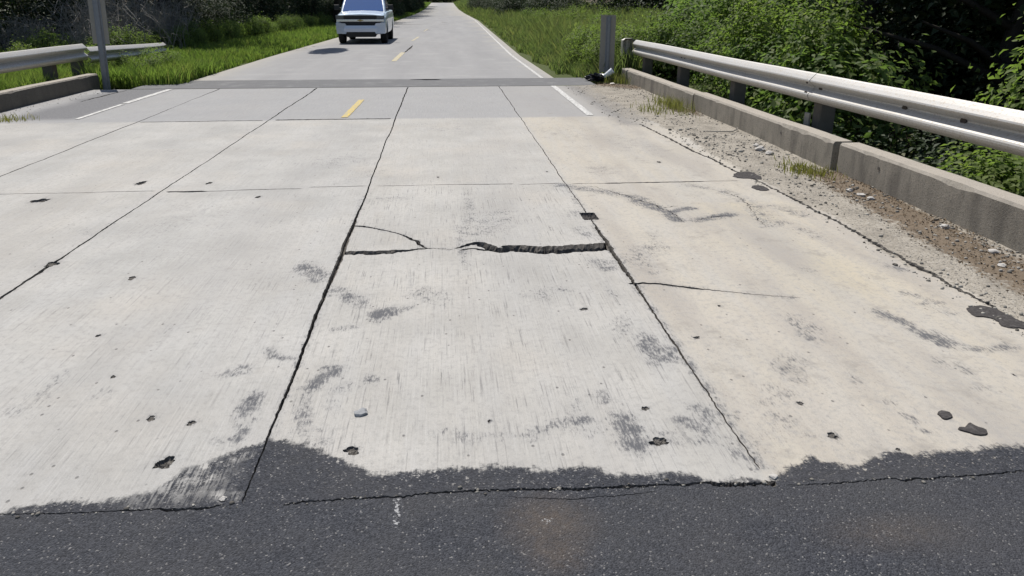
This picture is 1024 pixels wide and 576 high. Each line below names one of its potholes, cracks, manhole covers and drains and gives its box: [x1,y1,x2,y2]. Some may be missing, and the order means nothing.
crack [283,470,1023,506]
crack [591,124,1002,312]
crack [345,226,610,255]
pothole [648,437,669,446]
crack [0,504,224,515]
pothole [579,213,599,221]
pothole [153,456,175,469]
